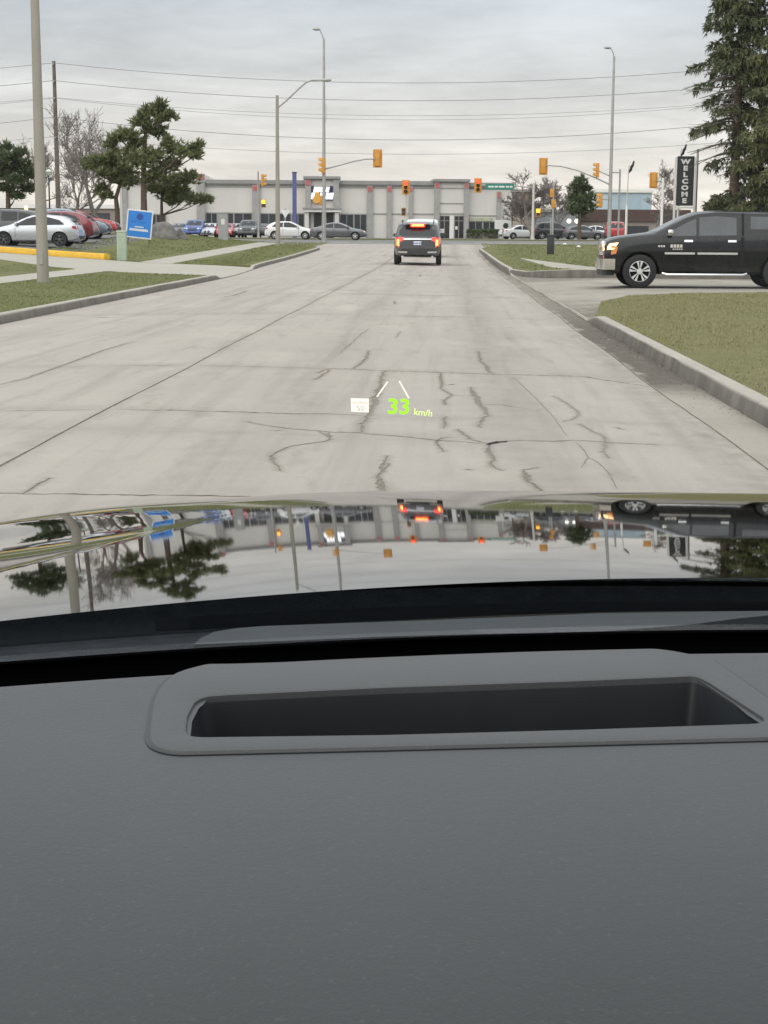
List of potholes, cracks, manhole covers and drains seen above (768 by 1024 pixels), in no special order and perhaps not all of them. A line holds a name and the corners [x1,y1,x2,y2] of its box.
crack [249,329,655,490]
